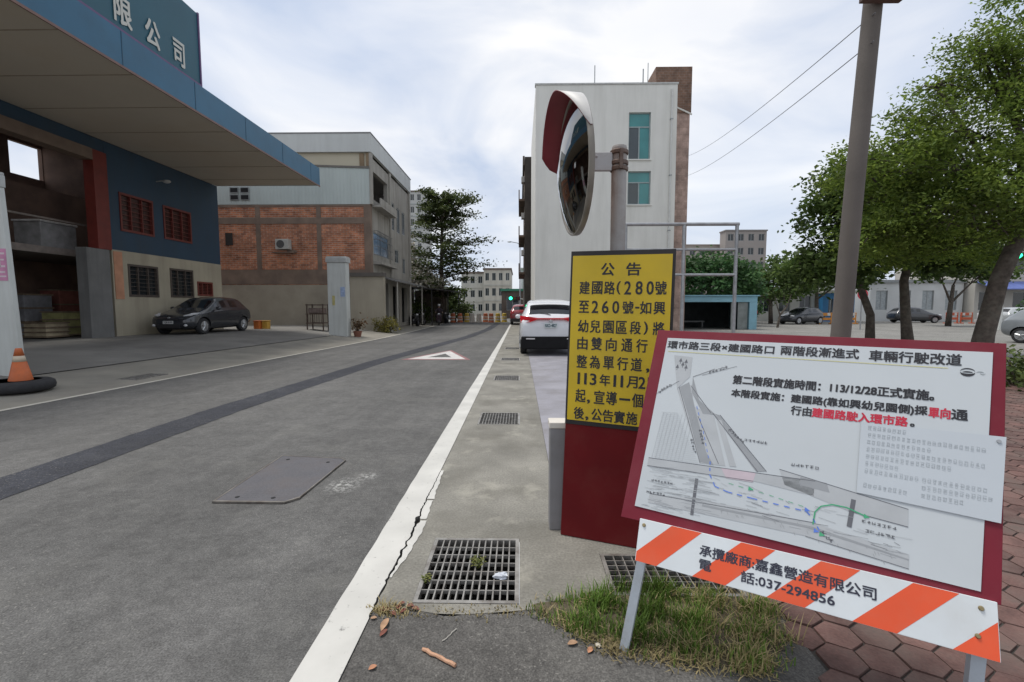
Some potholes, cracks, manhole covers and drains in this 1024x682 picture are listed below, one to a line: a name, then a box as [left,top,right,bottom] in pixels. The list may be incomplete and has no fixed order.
drain grate [412,538,519,604]
manhole cover [212,455,346,504]
drain grate [600,554,748,597]
drain grate [477,413,520,425]
